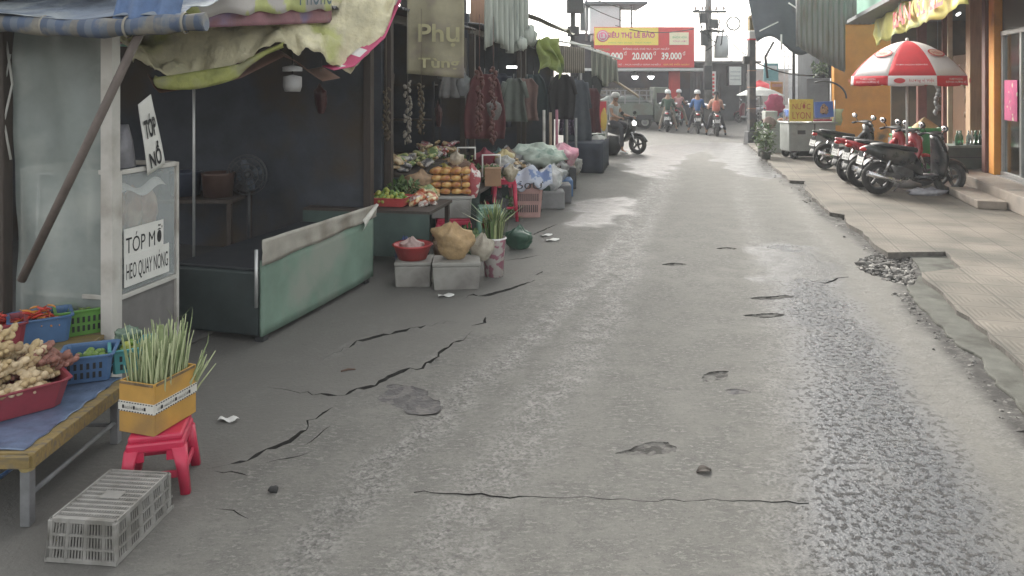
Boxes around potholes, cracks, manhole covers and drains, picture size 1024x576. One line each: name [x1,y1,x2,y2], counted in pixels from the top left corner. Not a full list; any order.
crack [466,255,543,298]
crack [414,491,808,504]
crack [216,317,486,475]
pothole [378,384,441,415]
pothole [615,442,677,456]
pothole [702,371,729,382]
pothole [854,253,918,286]
